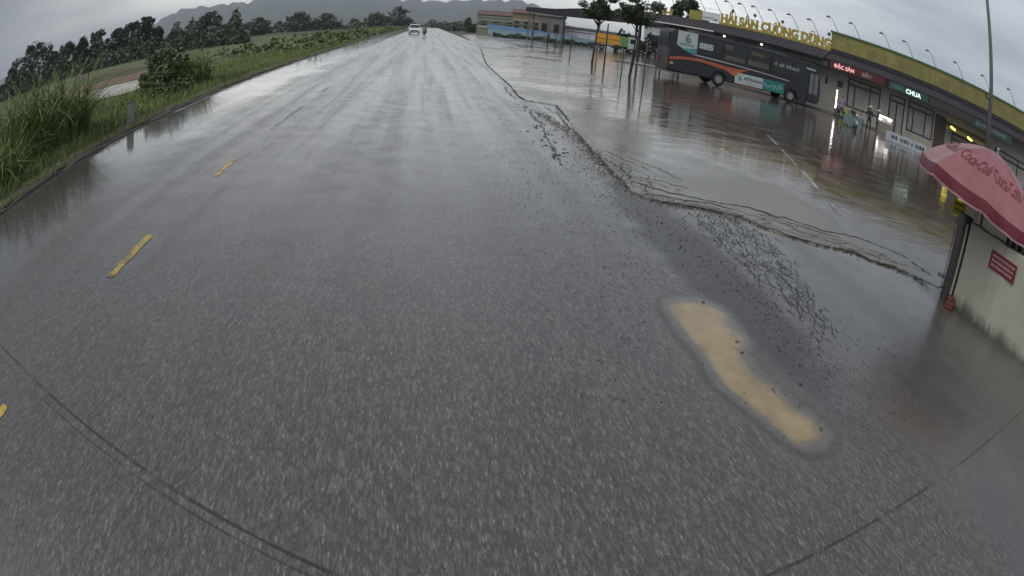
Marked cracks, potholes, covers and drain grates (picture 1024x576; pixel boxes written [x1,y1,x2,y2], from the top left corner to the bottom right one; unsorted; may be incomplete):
pothole [656,293,839,459]
crack [524,102,932,352]
